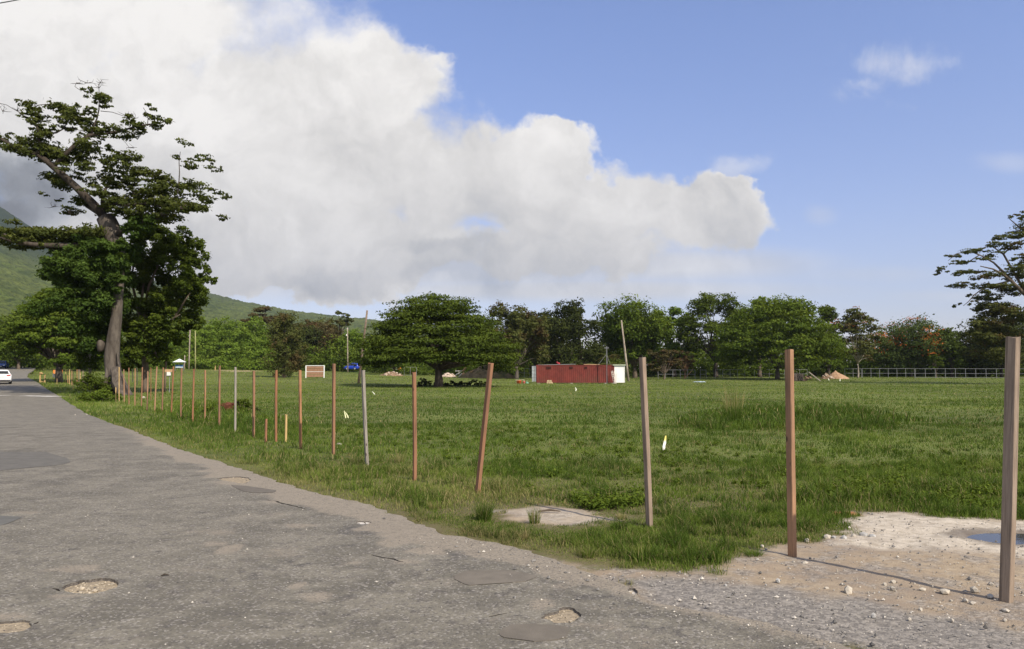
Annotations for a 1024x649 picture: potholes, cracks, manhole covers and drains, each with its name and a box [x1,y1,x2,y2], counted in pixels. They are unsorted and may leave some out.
pothole [541,607,581,623]
pothole [0,620,32,633]
pothole [62,578,119,594]
